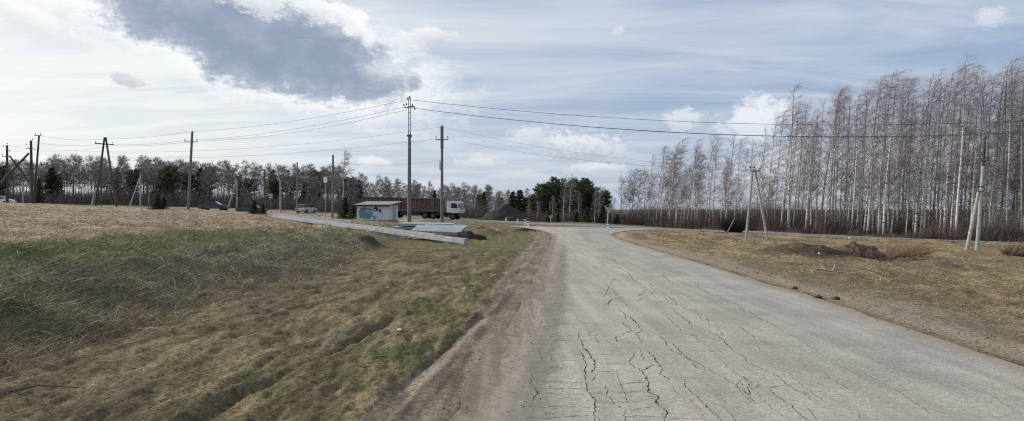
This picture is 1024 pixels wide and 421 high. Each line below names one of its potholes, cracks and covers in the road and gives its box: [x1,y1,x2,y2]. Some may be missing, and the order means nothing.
crack [525,256,937,421]
